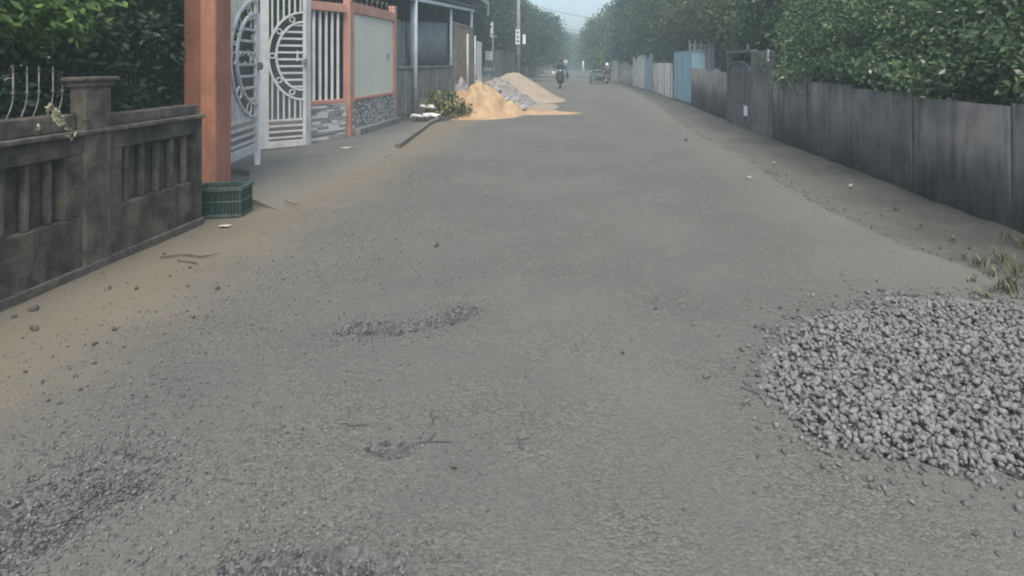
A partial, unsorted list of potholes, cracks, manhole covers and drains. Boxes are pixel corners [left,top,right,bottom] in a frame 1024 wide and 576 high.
pothole [216,545,409,576]
pothole [329,304,480,337]
pothole [362,439,418,461]
pothole [0,450,164,576]
